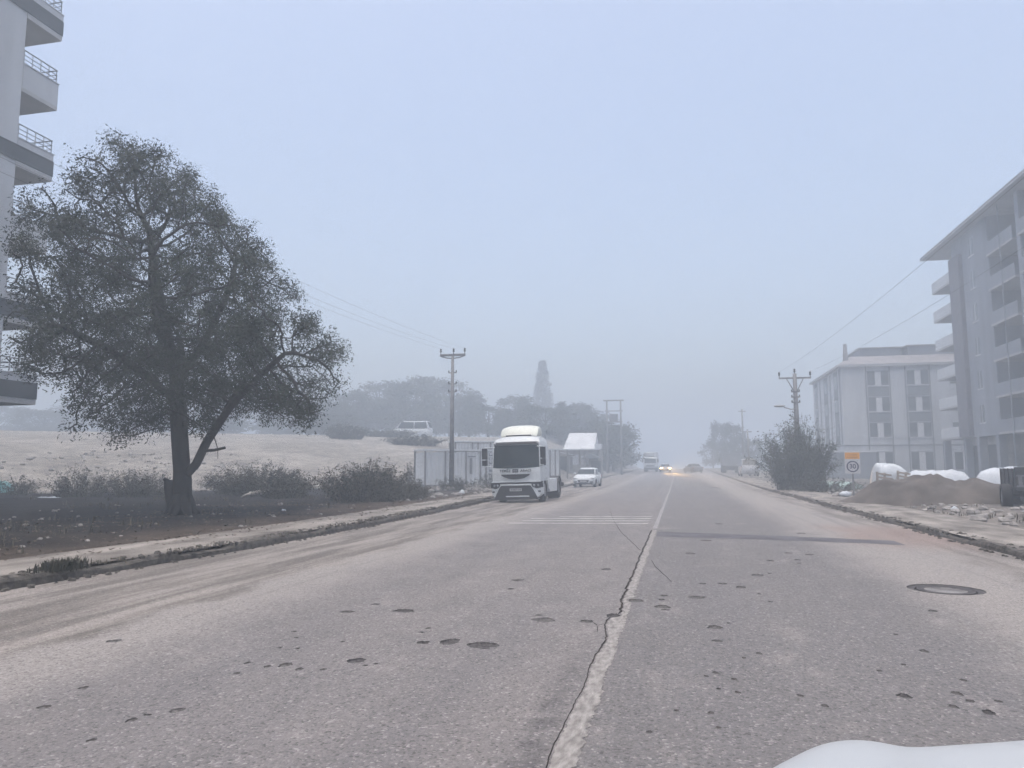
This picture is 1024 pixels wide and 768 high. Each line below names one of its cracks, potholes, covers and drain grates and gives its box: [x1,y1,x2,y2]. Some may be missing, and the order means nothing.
crack [545,511,670,768]
manhole cover [906,584,987,595]
